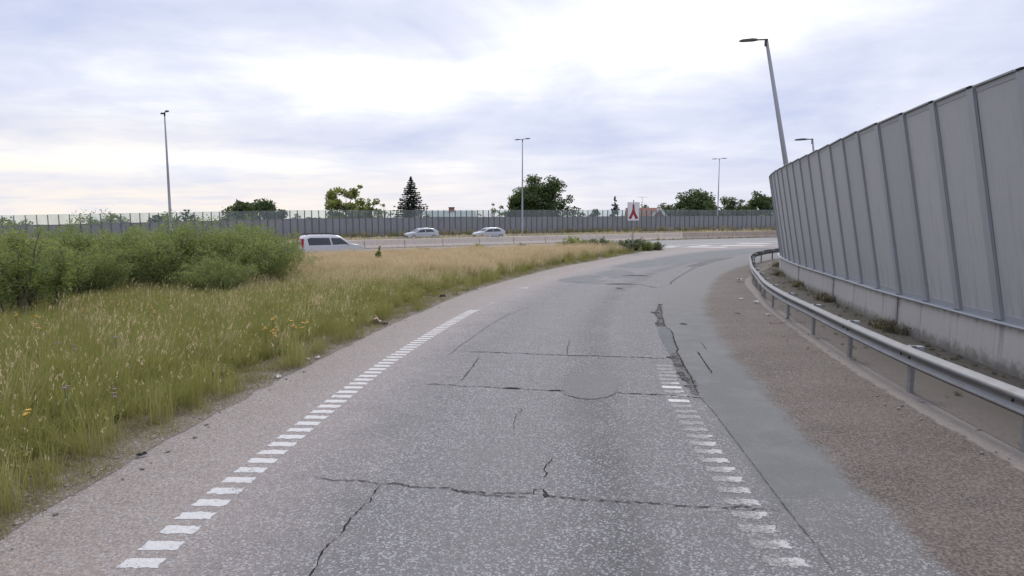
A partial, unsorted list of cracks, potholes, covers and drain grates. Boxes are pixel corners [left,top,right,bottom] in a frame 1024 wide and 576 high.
crack [309,459,774,576]
crack [444,305,712,399]
